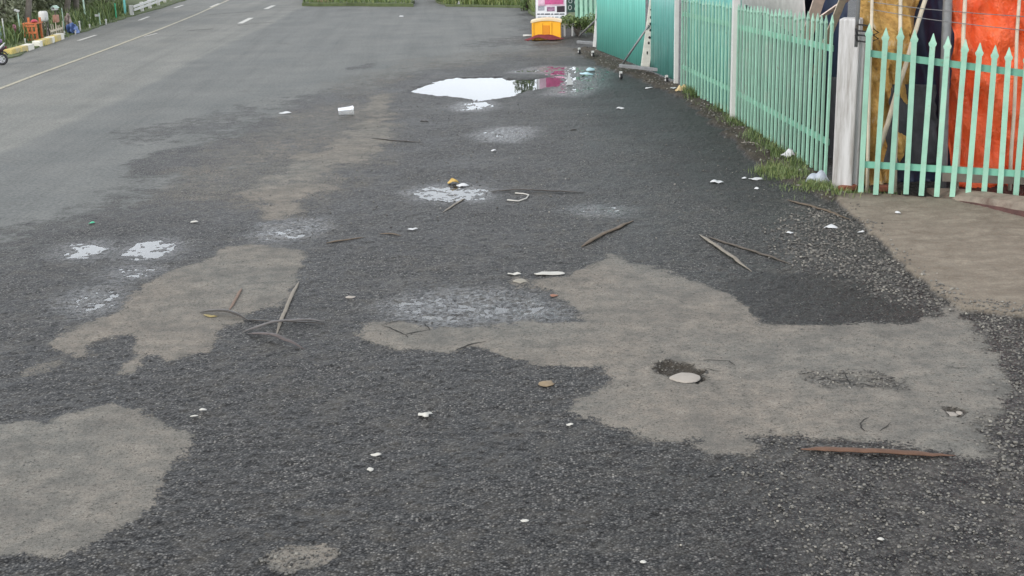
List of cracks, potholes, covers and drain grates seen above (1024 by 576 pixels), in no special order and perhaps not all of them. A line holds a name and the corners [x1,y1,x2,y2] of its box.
crack [382,320,430,337]
pothole [405,75,566,101]
pothole [651,359,707,384]
